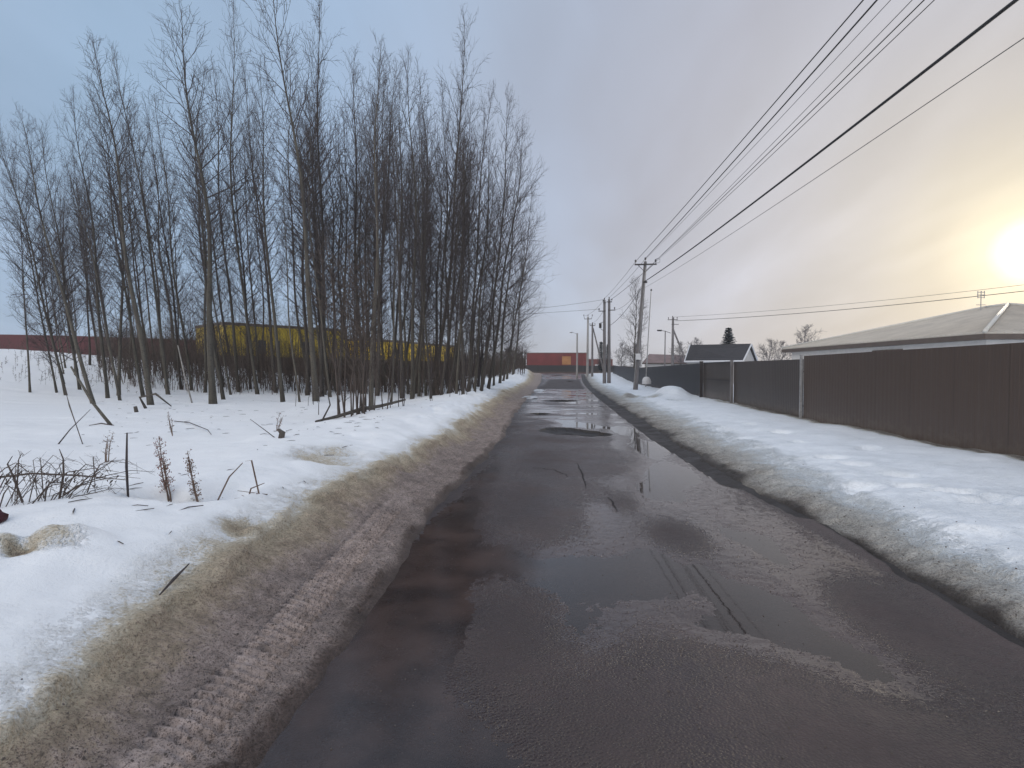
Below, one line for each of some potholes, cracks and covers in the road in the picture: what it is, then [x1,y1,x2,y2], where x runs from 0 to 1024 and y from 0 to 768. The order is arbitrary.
pothole [538,427,613,437]
